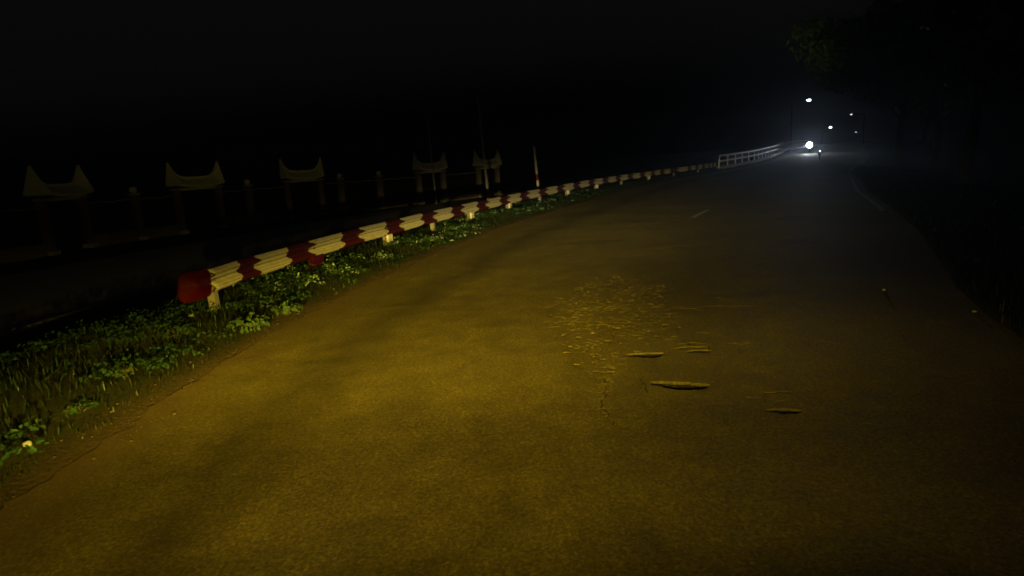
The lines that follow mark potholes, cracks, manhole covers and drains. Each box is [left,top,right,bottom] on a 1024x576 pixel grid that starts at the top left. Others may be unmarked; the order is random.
crack [543,275,755,425]
pothole [649,381,711,390]
